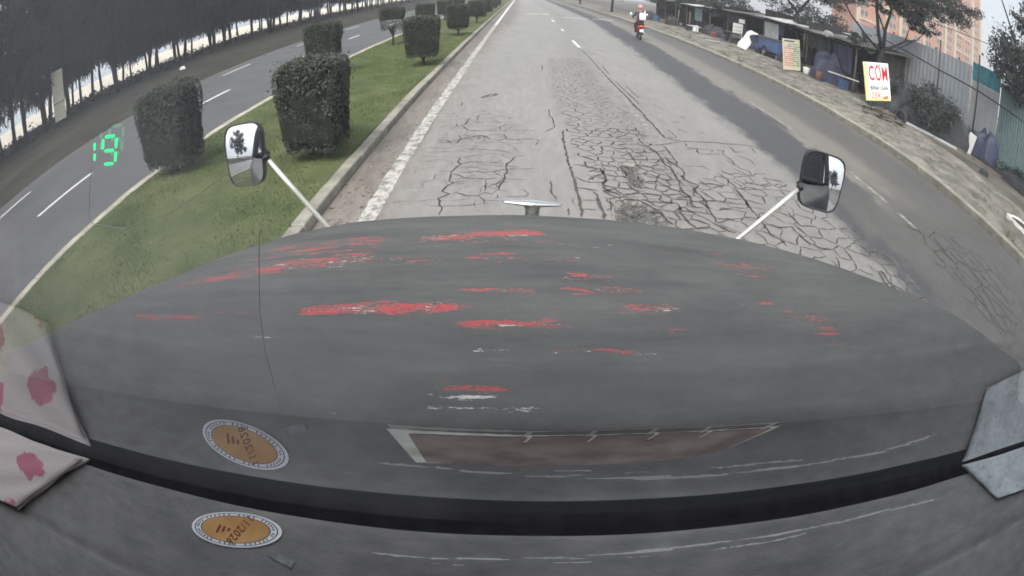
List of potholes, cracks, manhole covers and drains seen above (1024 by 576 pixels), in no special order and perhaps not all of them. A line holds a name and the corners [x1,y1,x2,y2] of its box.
crack [401,57,925,299]
pothole [616,160,645,191]
pothole [612,197,676,228]
crack [909,220,1024,349]
